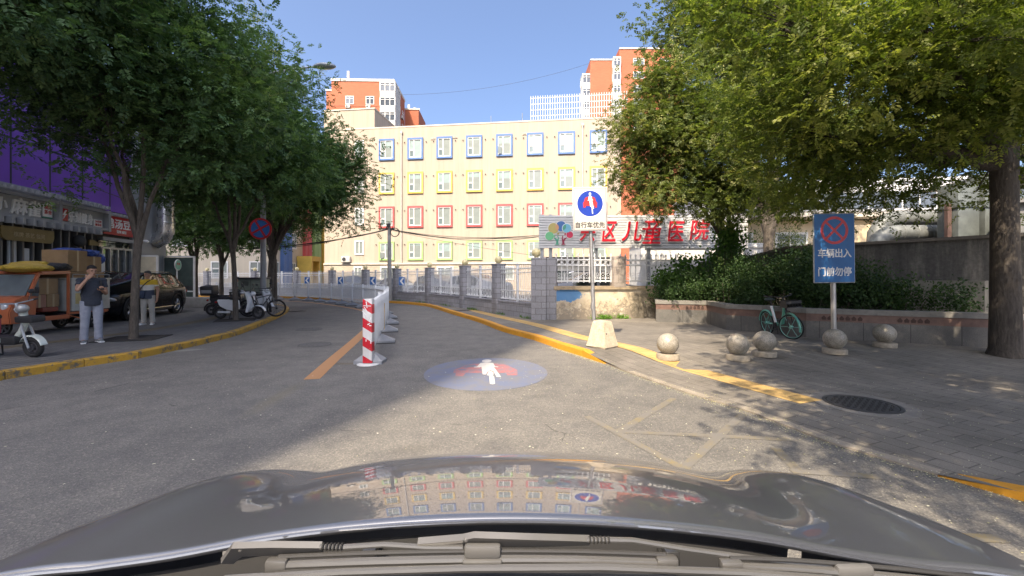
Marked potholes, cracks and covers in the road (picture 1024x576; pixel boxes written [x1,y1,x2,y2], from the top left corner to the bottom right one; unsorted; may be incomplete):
manhole cover [809,392,922,419]
